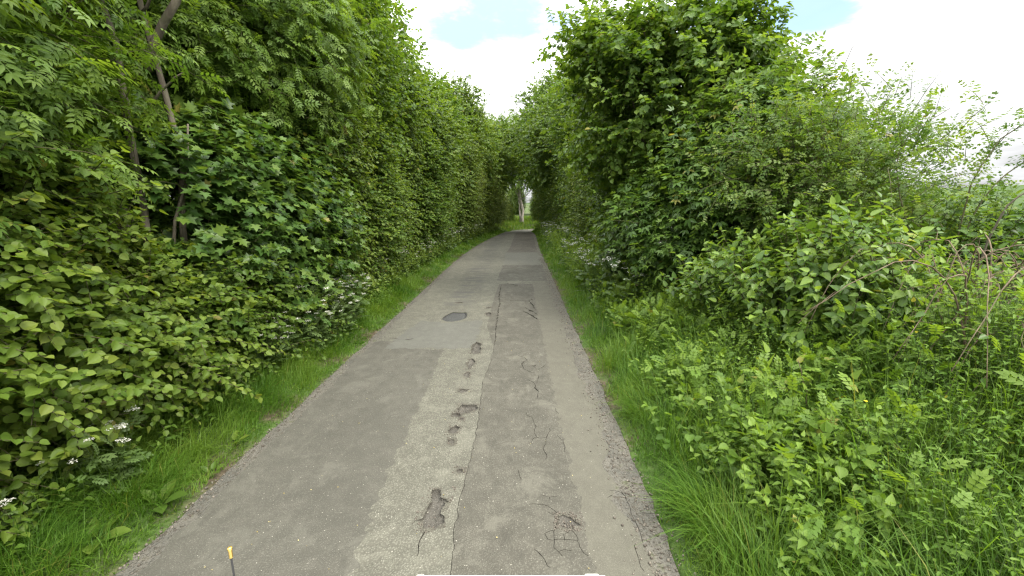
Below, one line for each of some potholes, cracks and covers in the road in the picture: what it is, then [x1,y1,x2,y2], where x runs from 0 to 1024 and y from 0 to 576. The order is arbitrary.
crack [534,495,588,567]
crack [518,355,565,457]
pothole [419,489,449,529]
pothole [457,404,478,413]
crack [494,283,539,345]
